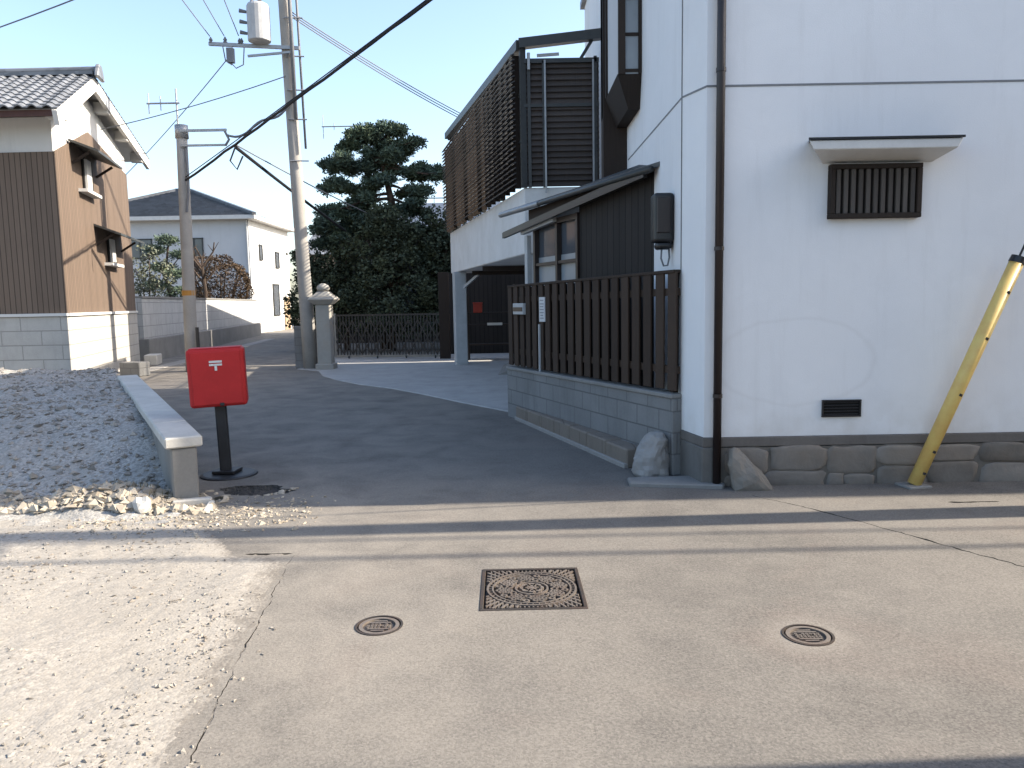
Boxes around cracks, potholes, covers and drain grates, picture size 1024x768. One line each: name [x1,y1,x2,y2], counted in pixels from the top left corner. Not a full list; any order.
crack [753,495,1024,567]
manhole cover [781,624,835,646]
pothole [205,485,299,497]
manhole cover [355,615,403,636]
manhole cover [479,567,589,611]
